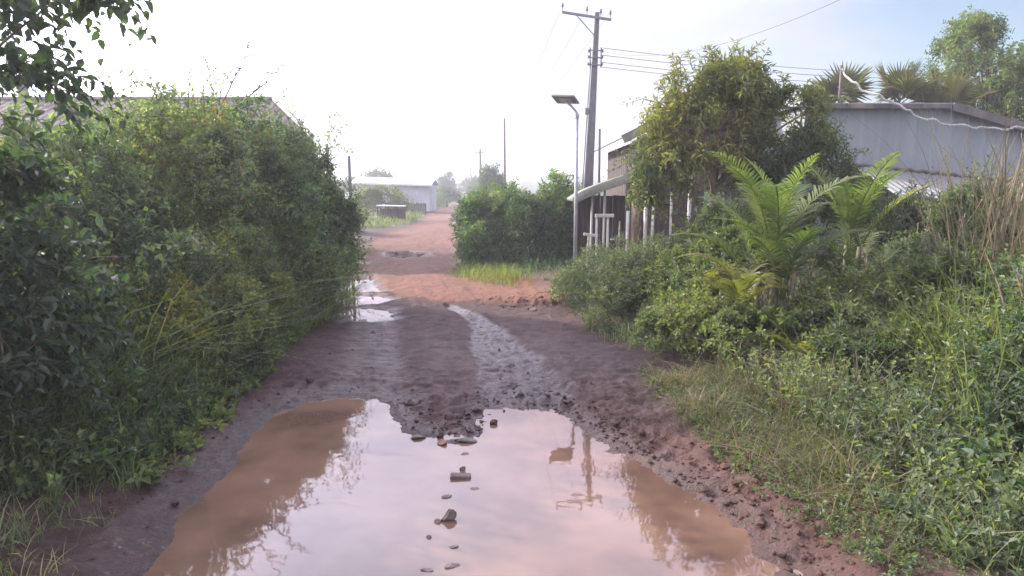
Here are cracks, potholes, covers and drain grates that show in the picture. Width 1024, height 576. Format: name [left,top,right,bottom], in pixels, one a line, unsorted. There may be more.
pothole [342,275,388,293]
pothole [383,250,433,258]
pothole [336,293,395,307]
pothole [116,388,803,576]
pothole [337,307,397,322]
